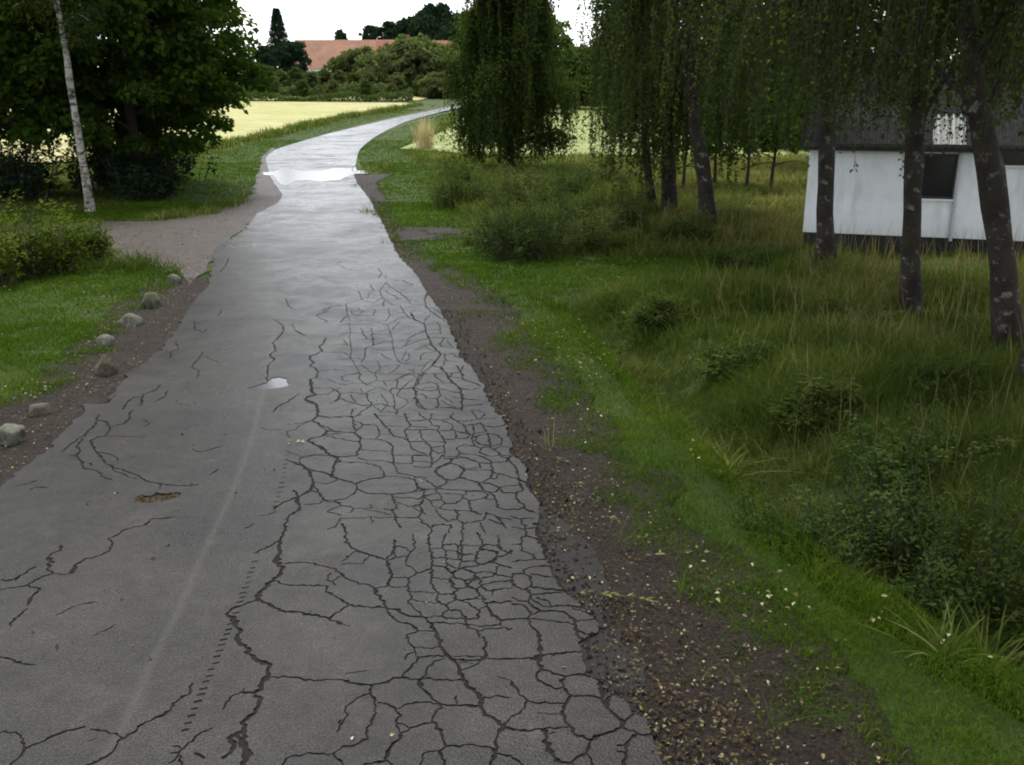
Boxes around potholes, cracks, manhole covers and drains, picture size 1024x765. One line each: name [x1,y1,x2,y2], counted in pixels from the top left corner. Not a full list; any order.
crack [0,276,651,765]
pothole [134,492,181,503]
